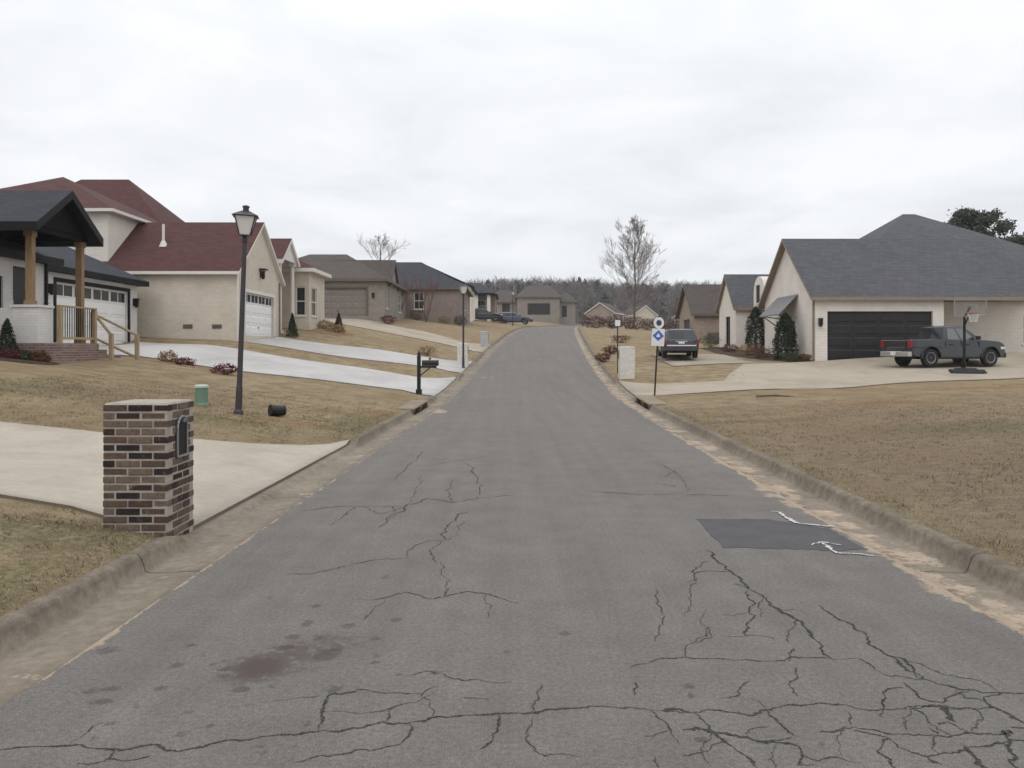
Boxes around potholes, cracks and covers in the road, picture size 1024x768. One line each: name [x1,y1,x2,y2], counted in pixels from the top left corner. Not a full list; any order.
crack [295,453,515,619]
crack [631,550,1024,768]
crack [590,465,727,496]
crack [0,671,650,765]
